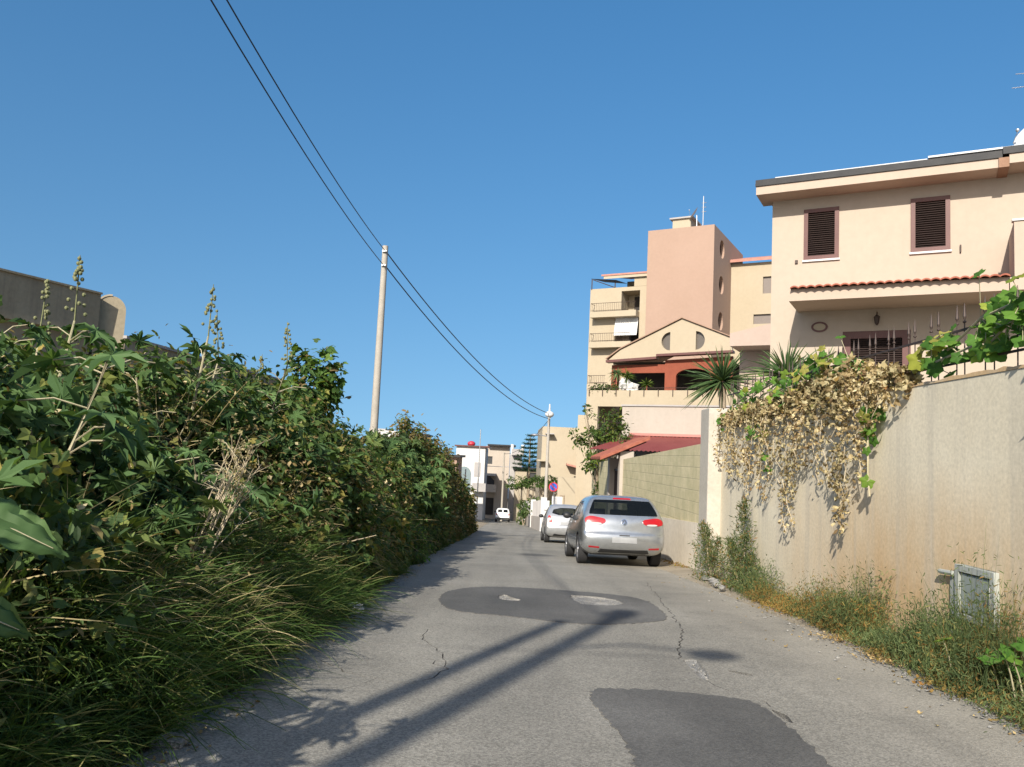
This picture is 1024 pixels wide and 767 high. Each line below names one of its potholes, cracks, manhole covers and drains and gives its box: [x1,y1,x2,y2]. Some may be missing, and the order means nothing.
crack [321,630,449,689]
crack [647,585,771,707]
